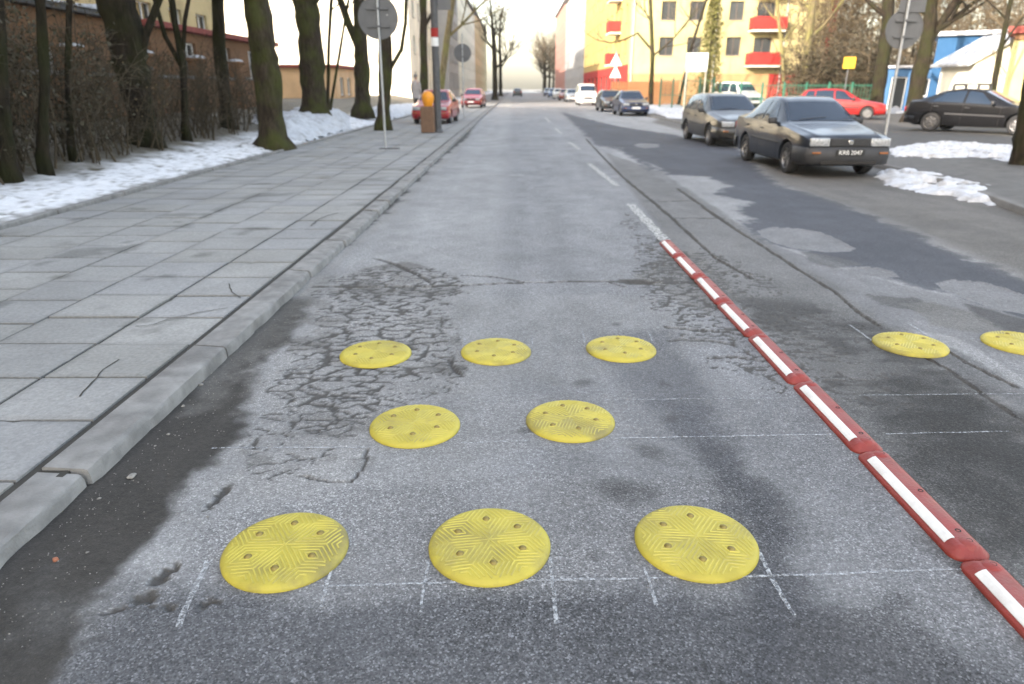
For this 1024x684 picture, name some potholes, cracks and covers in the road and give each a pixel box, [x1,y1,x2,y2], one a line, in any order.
crack [144,139,926,513]
crack [79,359,120,396]
